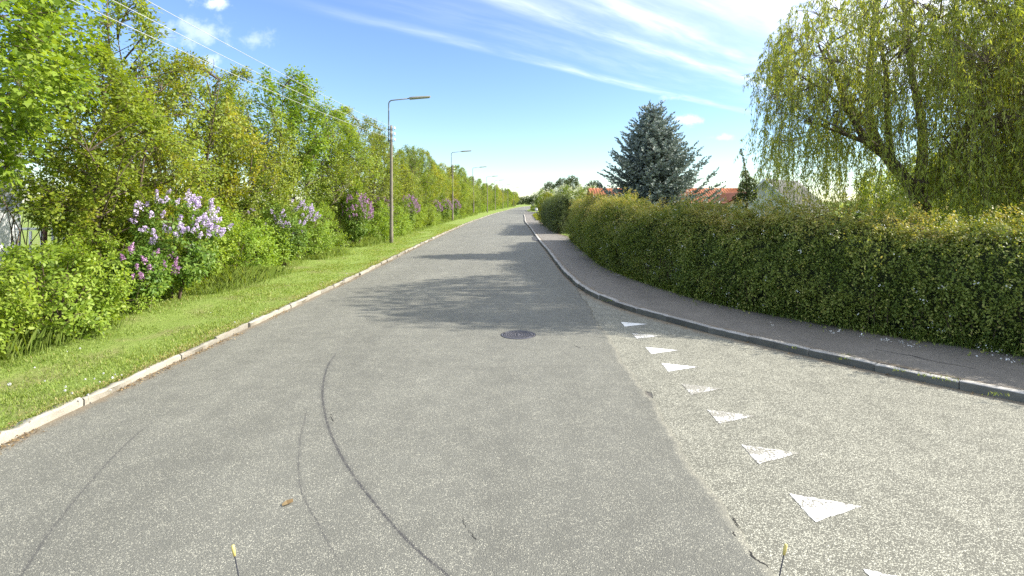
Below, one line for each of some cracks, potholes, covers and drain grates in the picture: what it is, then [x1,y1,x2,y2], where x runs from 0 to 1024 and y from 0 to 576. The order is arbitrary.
manhole cover [501,330,536,339]
